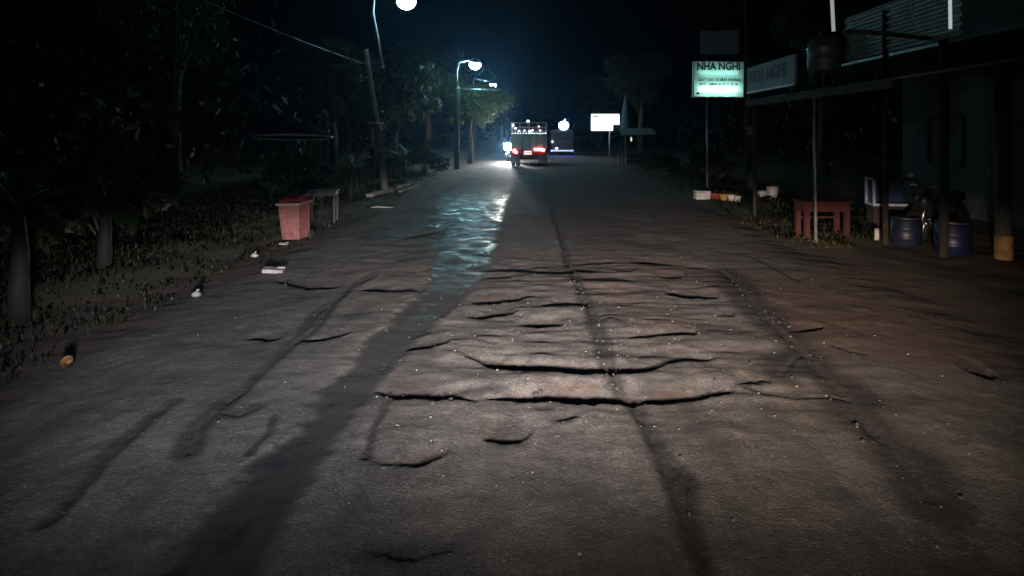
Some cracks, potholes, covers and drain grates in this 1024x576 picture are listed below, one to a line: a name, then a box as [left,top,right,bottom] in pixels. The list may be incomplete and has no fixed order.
crack [551,209,946,576]
pothole [482,407,537,445]
crack [359,398,394,460]
crack [40,275,376,527]
